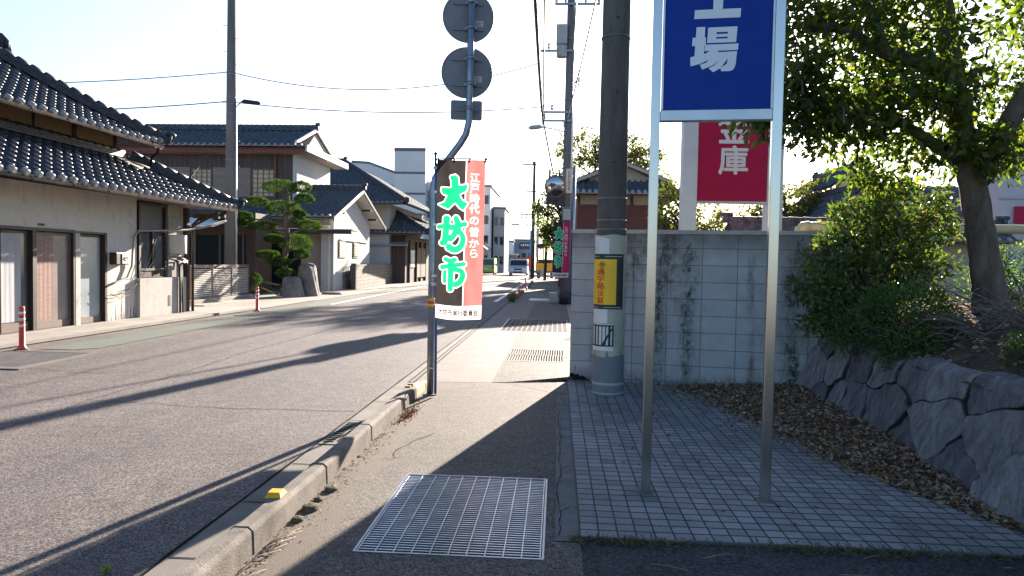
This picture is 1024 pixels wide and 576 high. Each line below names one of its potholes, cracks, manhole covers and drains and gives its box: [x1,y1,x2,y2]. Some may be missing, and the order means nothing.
drain grate [500,319,569,332]
drain grate [352,474,548,560]
drain grate [318,421,363,445]
